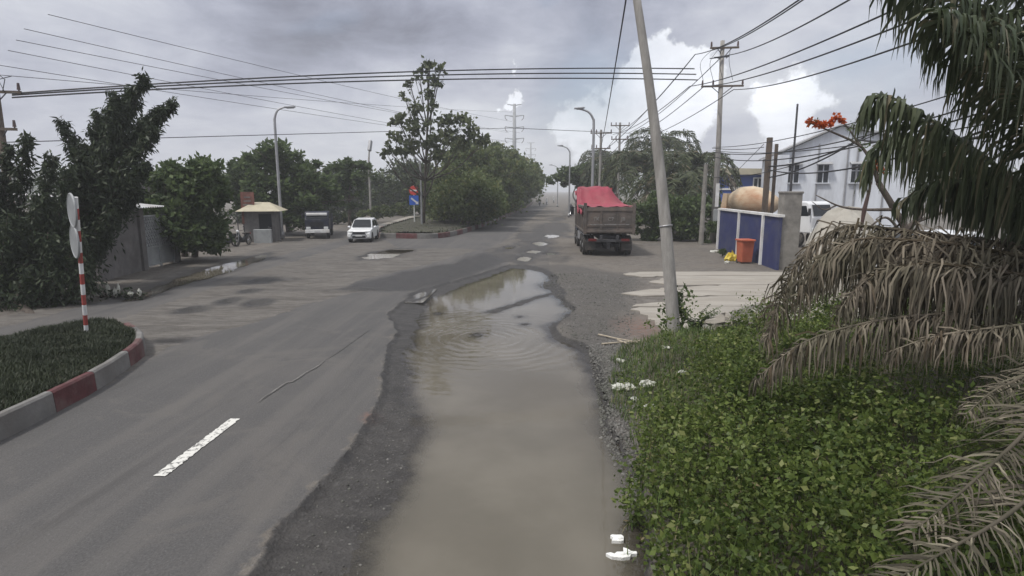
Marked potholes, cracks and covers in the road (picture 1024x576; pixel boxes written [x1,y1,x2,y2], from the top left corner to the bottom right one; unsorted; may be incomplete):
crack [260,330,369,402]
pothole [245,264,659,576]
